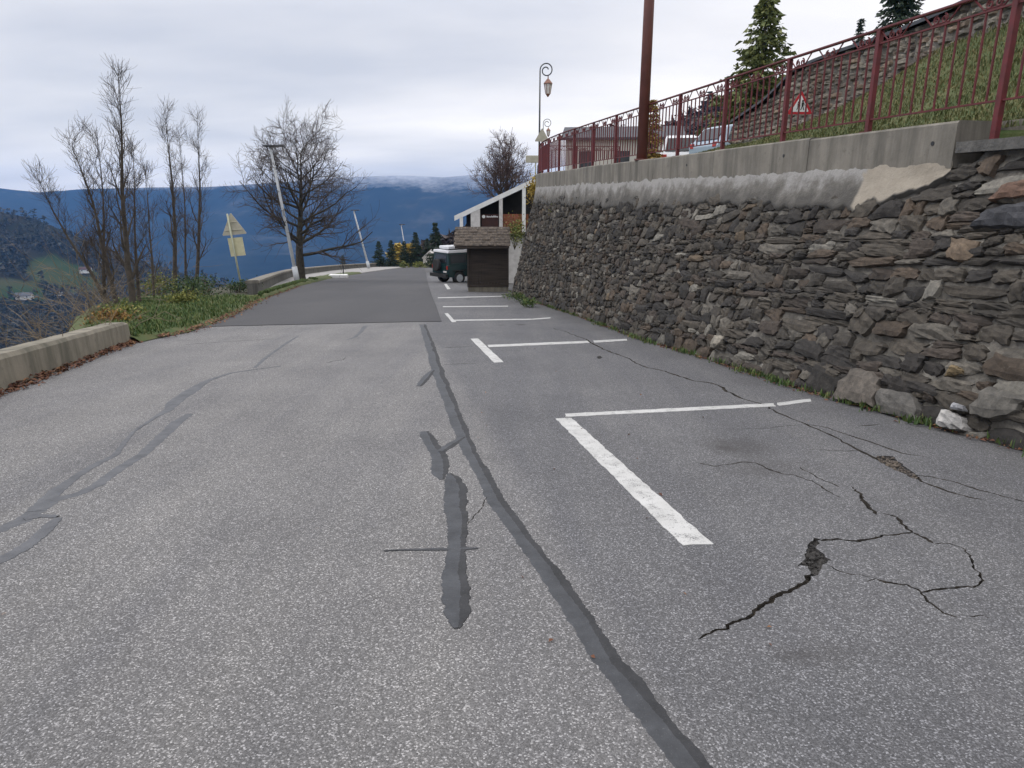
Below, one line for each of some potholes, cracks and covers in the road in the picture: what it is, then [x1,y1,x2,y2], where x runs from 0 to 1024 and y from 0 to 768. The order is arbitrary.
crack [697,462,989,640]
pothole [876,456,918,479]
pothole [796,538,830,578]
crack [554,328,1024,502]
